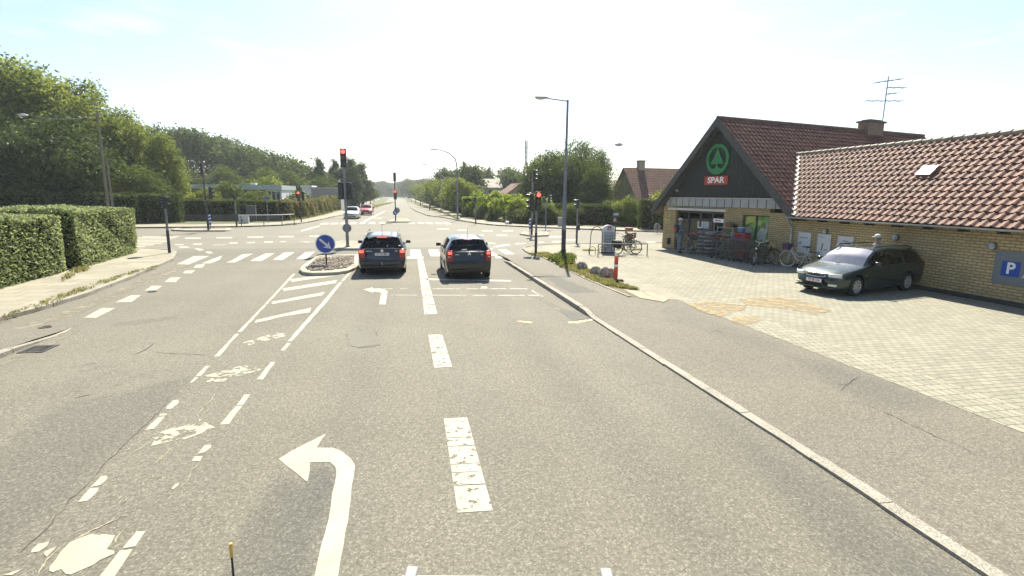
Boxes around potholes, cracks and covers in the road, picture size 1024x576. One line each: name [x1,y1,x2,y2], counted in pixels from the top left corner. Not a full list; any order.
drain grate [16,345,59,354]
